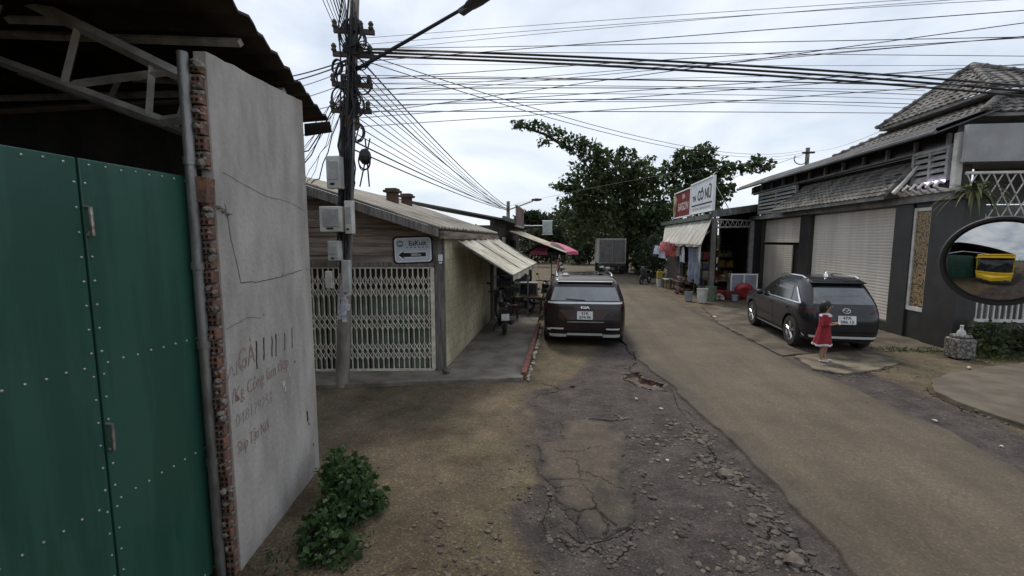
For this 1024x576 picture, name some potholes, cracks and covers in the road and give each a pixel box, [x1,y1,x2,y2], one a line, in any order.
pothole [622,371,669,392]
crack [541,476,643,569]
crack [624,348,640,372]
